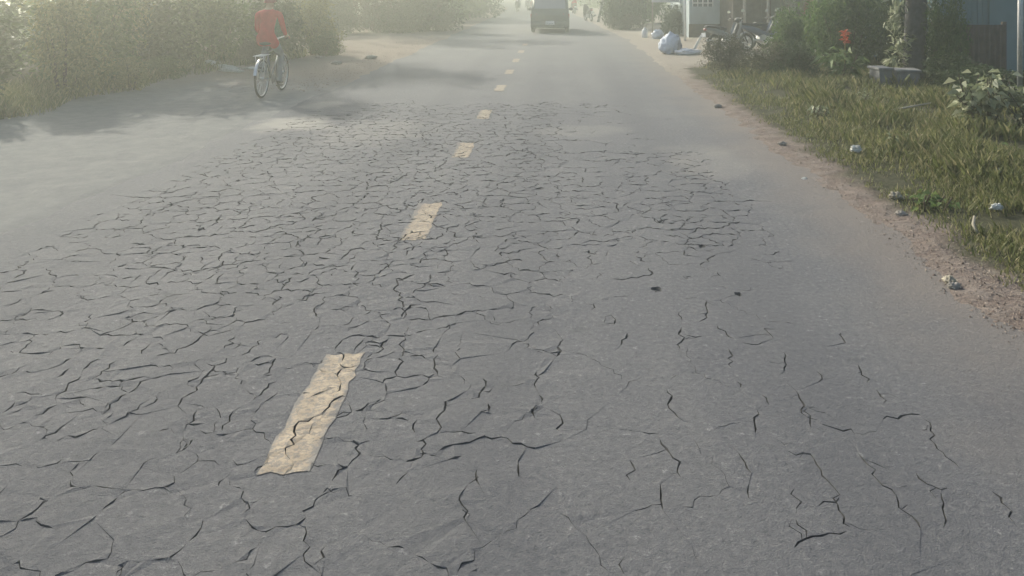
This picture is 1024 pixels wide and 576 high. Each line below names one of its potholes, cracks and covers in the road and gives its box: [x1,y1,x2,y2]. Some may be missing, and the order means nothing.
crack [552,104,958,575]
crack [0,100,695,576]
